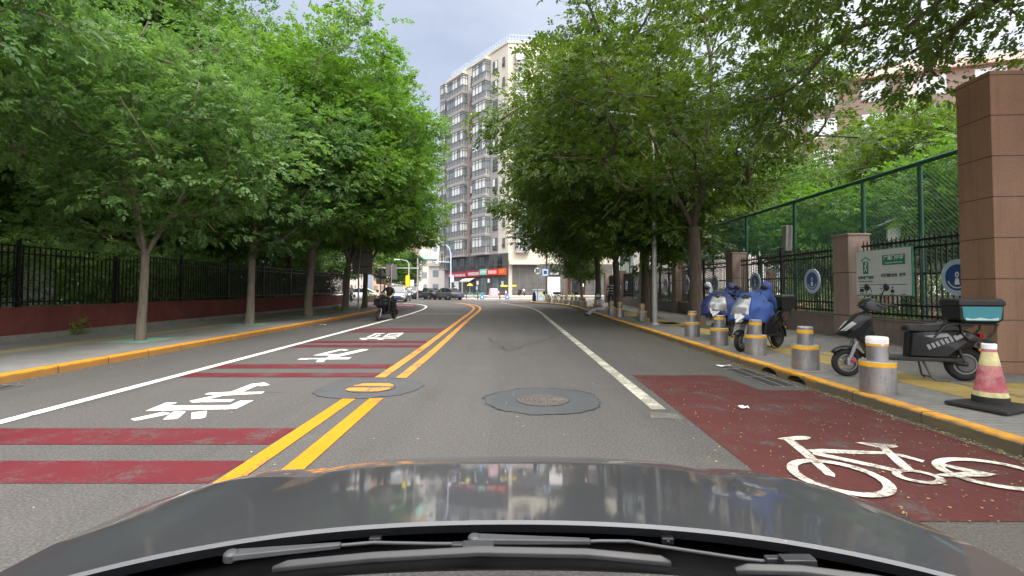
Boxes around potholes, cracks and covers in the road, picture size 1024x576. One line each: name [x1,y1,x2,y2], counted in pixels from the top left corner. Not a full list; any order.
drain grate [723,368,799,387]
crack [487,335,560,351]
manhole cover [516,394,570,406]
manhole cover [345,383,396,393]
